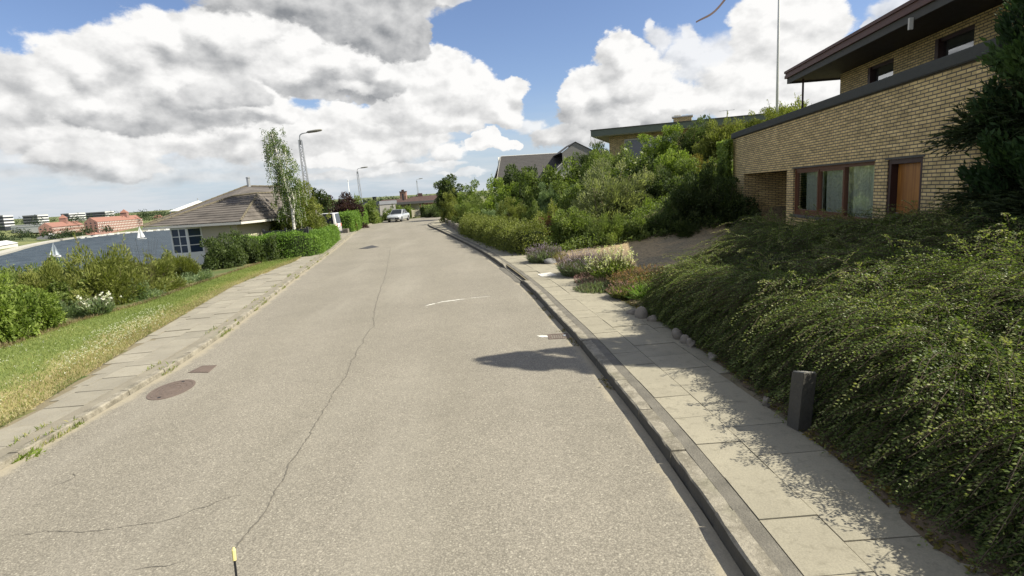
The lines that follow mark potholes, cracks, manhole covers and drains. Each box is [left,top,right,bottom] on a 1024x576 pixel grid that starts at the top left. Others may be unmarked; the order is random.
manhole cover [146,379,196,400]
crack [16,254,390,549]
manhole cover [188,365,217,373]
